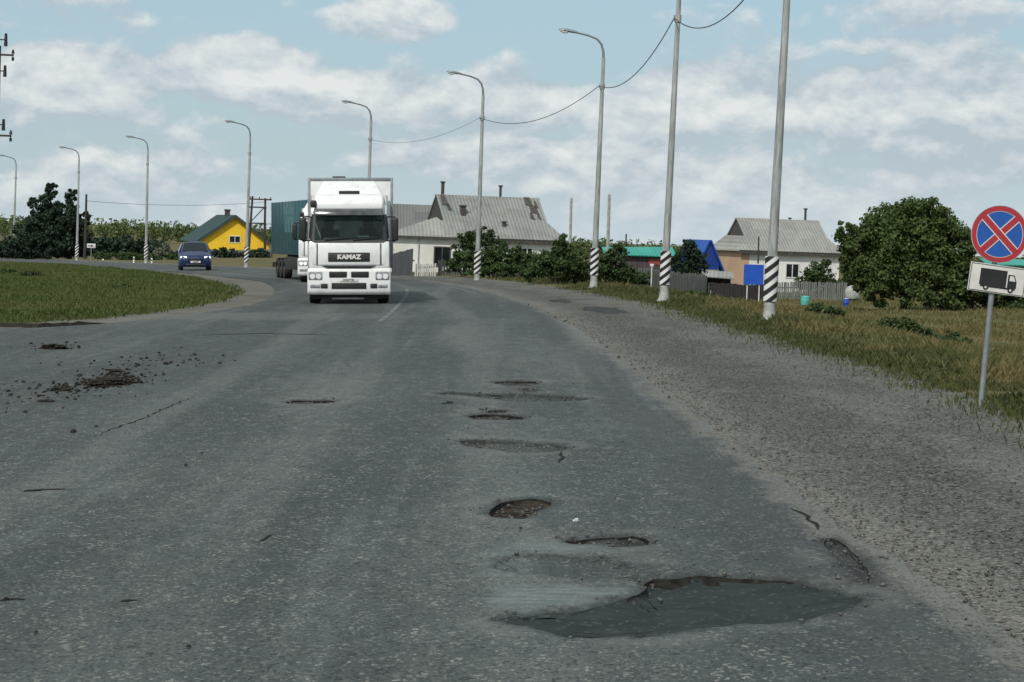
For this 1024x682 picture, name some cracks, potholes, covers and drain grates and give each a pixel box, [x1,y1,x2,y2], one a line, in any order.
pothole [499,576,863,638]
pothole [824,538,870,584]
pothole [488,499,552,519]
pothole [583,306,629,314]
pothole [565,536,649,547]
crack [791,508,820,529]
pothole [461,440,566,453]
pothole [441,393,587,402]
